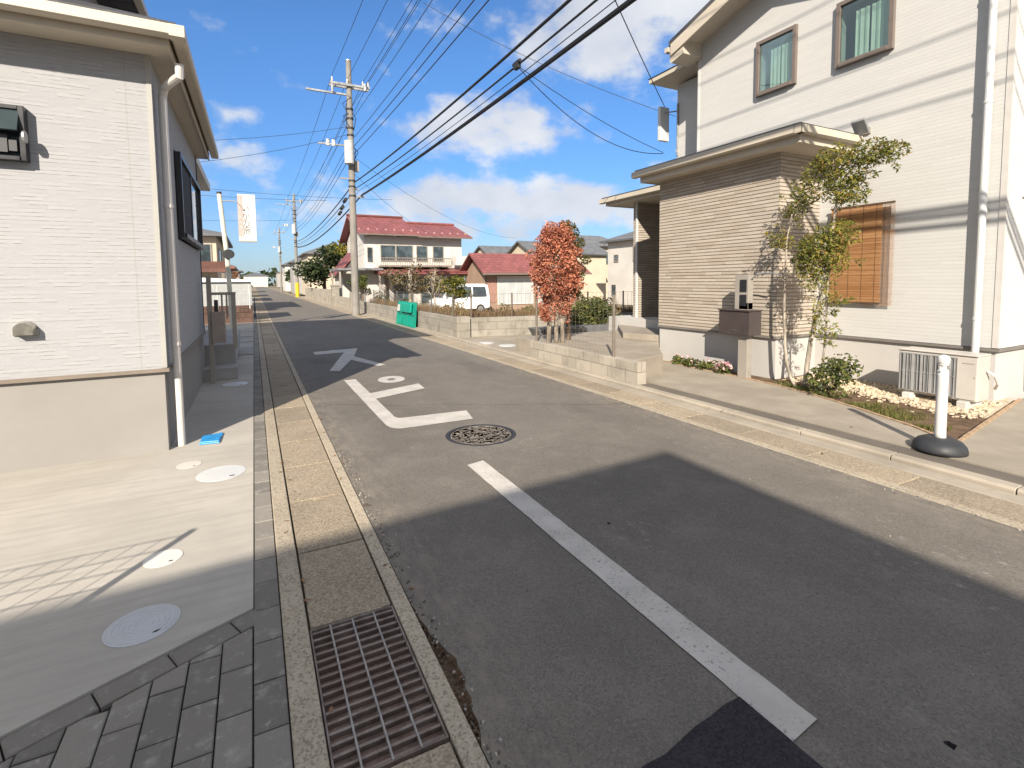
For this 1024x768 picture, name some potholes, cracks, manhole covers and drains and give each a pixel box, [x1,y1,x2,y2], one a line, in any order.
utility cover [142,549,183,568]
utility cover [102,604,181,648]
utility cover [176,461,201,469]
utility cover [196,465,246,482]
drain grate [310,606,449,768]
manhole cover [446,424,516,446]
